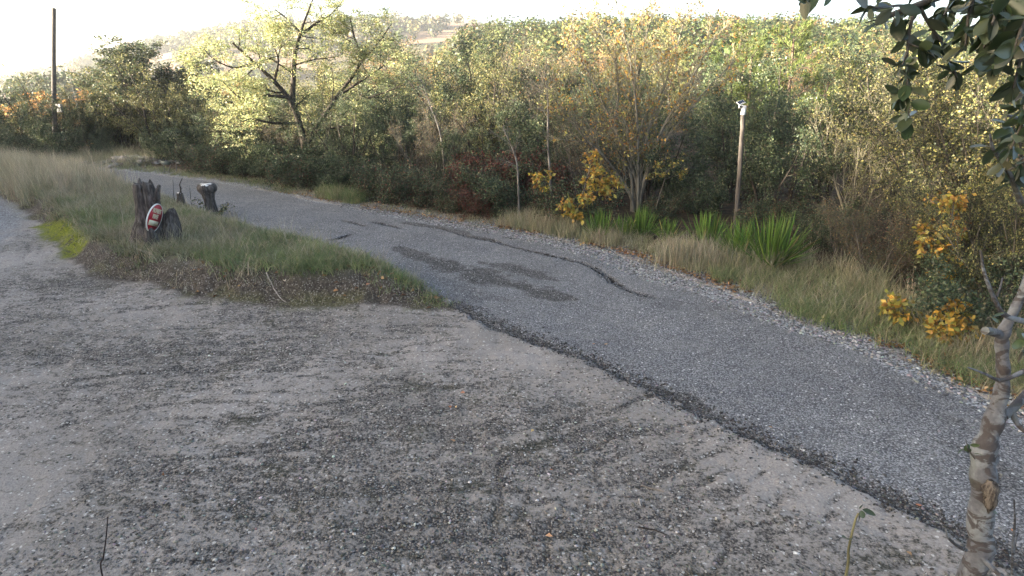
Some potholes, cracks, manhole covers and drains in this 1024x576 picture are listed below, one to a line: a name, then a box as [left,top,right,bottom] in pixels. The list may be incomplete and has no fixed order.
crack [330,220,655,298]
